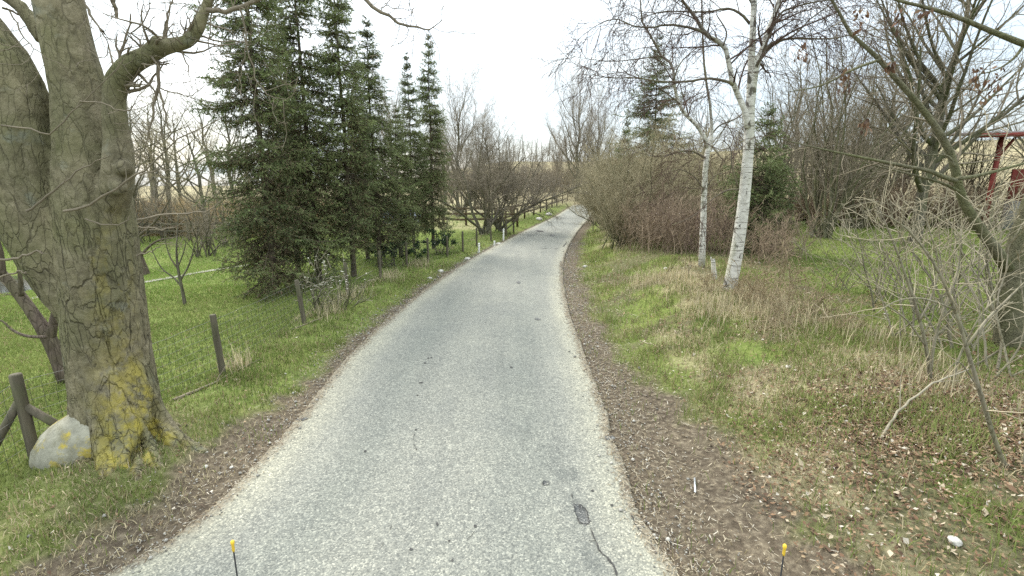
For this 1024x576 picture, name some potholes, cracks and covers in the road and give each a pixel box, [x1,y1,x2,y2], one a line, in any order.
pothole [573,502,591,526]
crack [571,495,618,576]
